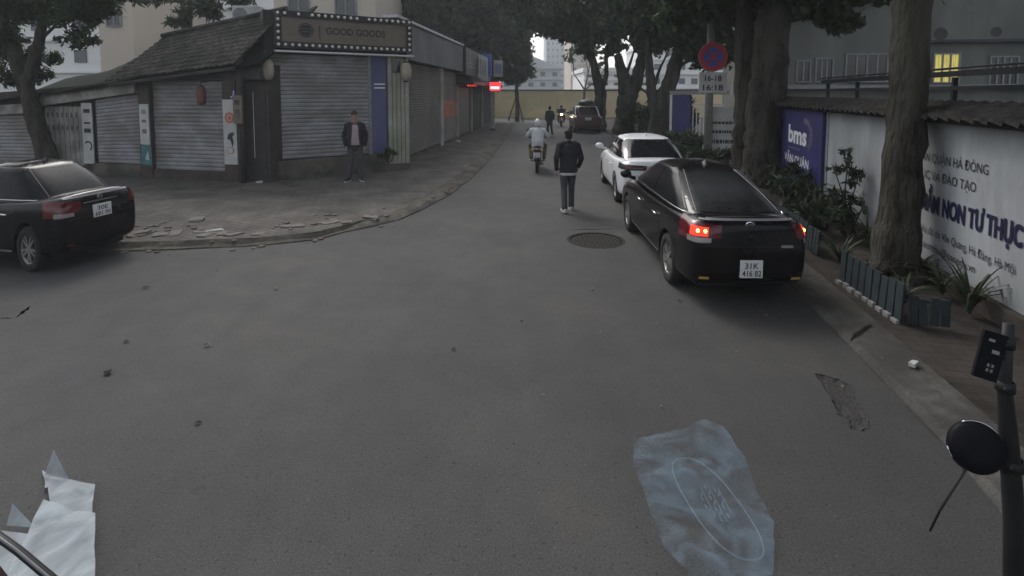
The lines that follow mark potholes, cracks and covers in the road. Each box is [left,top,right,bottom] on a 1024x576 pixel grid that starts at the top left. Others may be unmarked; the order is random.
manhole cover [567,232,625,249]
pothole [815,373,871,432]
